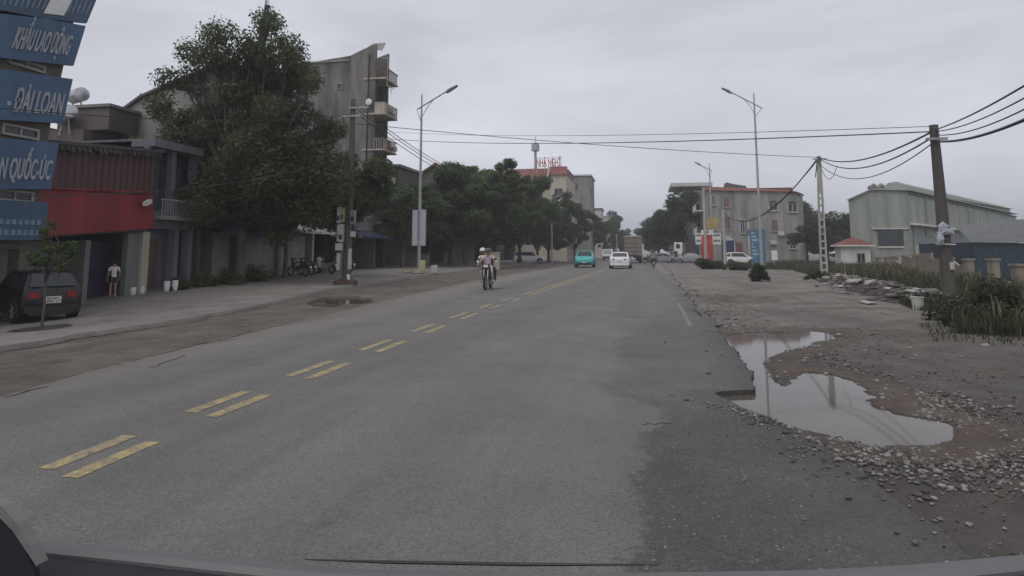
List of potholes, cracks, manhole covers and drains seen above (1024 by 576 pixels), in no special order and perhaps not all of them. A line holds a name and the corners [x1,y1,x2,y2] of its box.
pothole [307,295,388,307]
pothole [720,327,1024,468]
crack [128,320,302,367]
